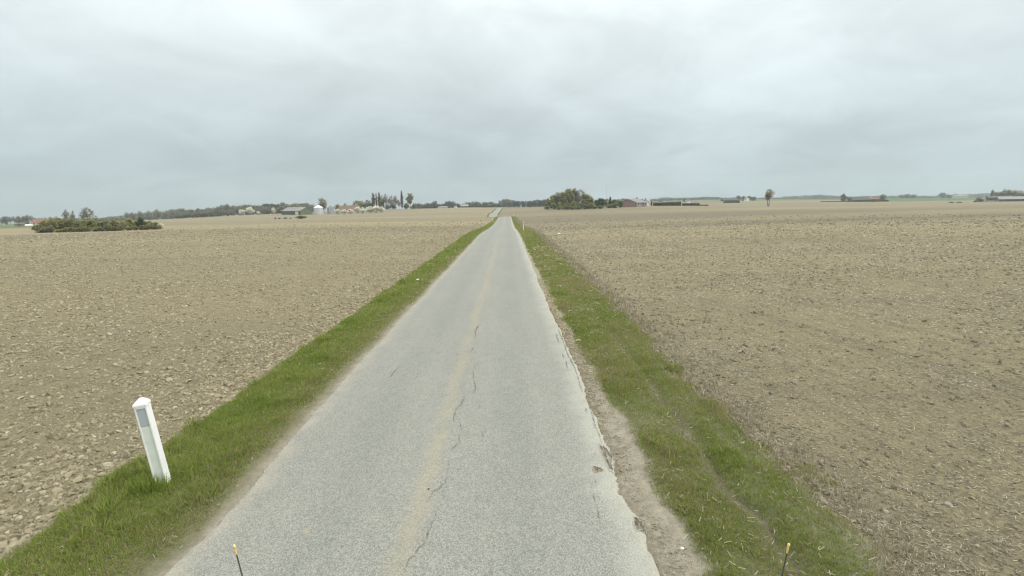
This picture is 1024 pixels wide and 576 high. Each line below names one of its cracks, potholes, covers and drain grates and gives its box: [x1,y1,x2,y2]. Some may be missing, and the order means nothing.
crack [430,324,497,497]
